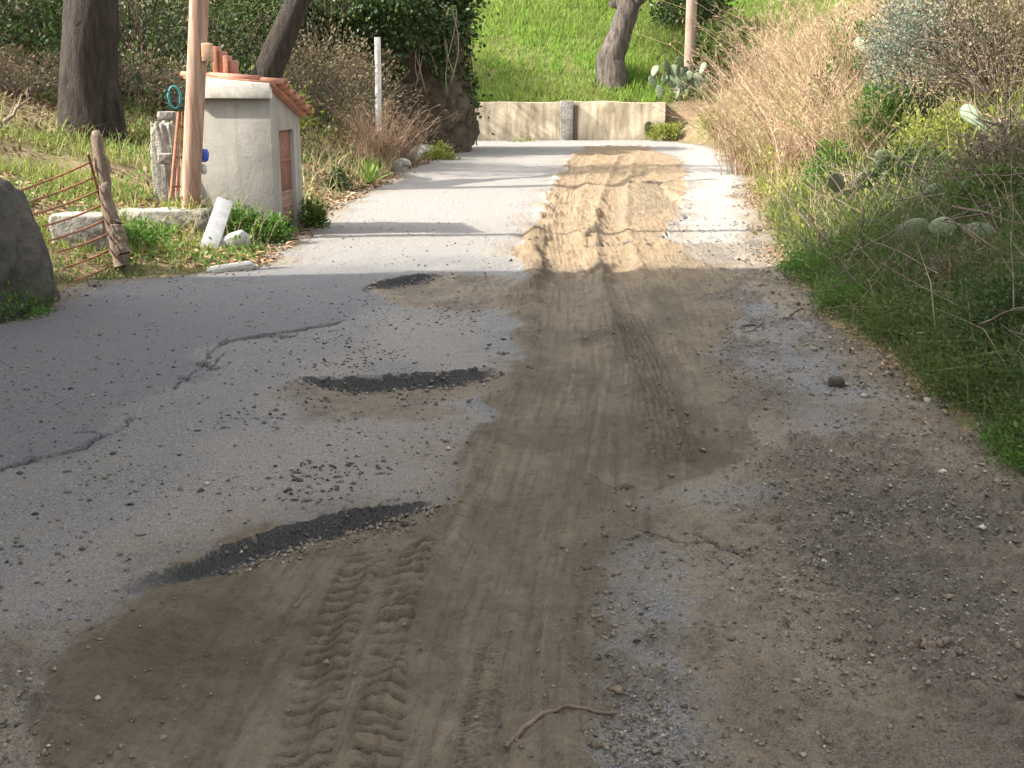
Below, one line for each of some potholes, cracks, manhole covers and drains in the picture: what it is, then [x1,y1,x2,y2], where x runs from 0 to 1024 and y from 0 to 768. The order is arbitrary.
crack [171,322,338,391]
pothole [295,369,536,407]
crack [0,415,135,472]
pothole [370,273,477,307]
crack [622,532,759,557]
